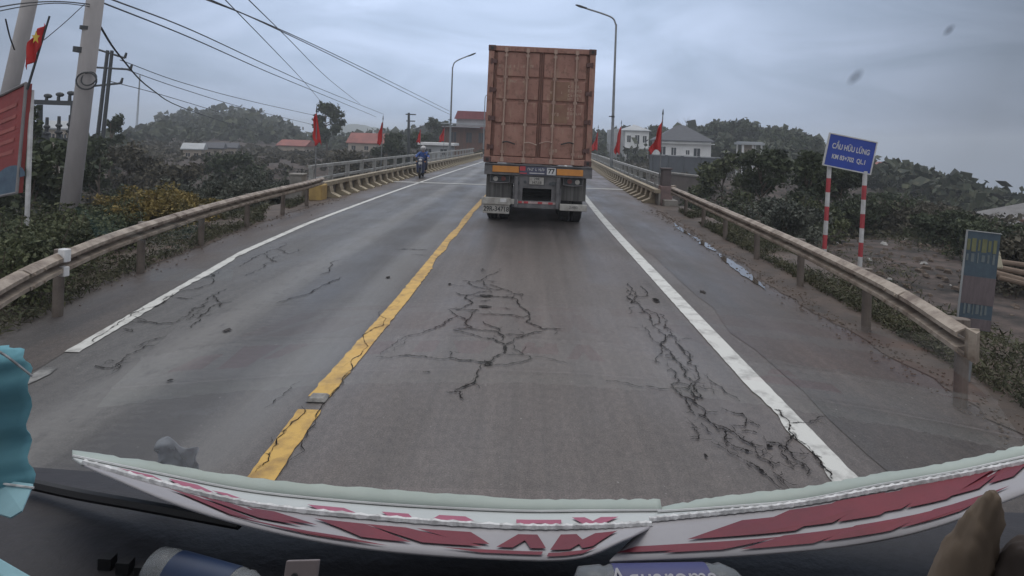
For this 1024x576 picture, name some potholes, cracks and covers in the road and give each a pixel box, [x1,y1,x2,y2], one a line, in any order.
crack [255,269,564,474]
crack [607,283,832,488]
crack [92,269,231,376]
